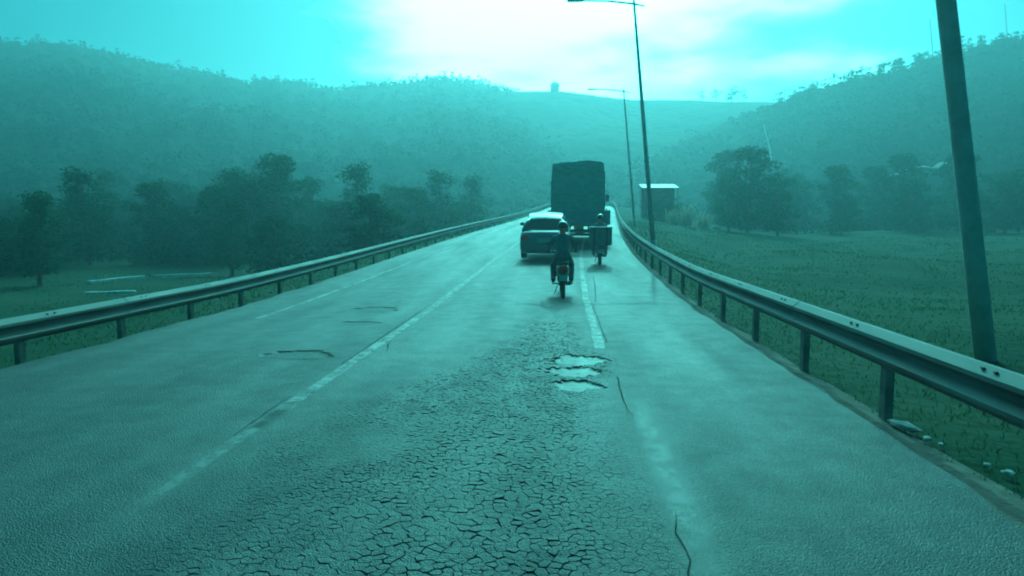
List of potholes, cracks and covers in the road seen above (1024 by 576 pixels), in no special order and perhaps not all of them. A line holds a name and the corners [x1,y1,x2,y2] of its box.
pothole [547,367,601,377]
pothole [551,354,610,365]
pothole [252,349,340,359]
crack [111,275,700,576]
pothole [554,380,608,392]
